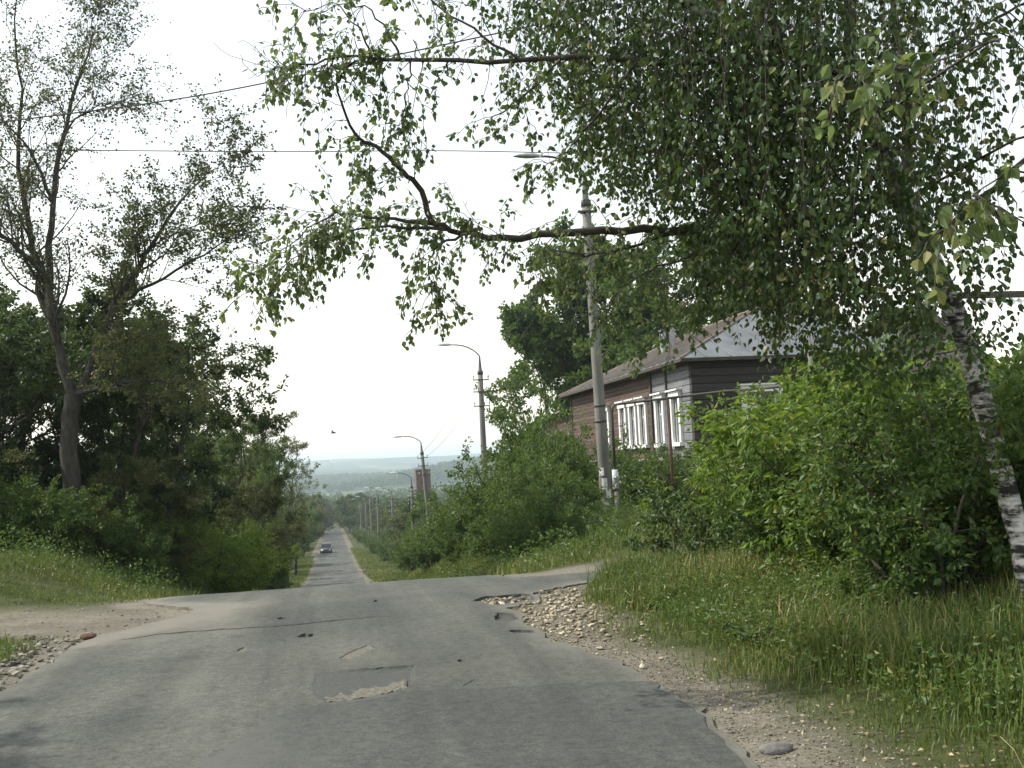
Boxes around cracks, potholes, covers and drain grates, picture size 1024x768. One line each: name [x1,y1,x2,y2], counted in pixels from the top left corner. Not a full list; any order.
crack [121,616,390,640]
pothole [311,665,416,703]
pothole [339,645,375,660]
pothole [474,594,534,605]
pothole [494,612,519,622]
